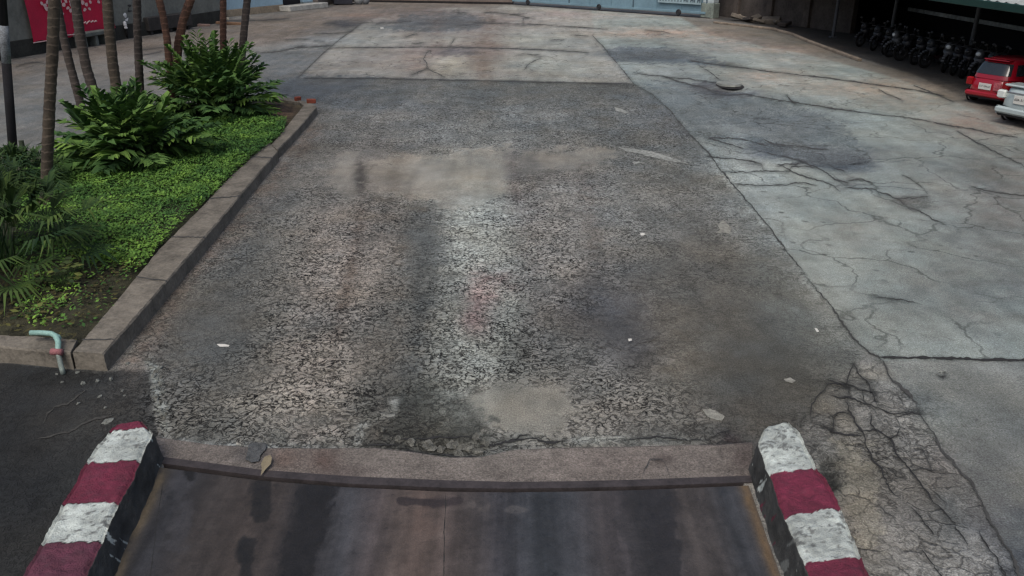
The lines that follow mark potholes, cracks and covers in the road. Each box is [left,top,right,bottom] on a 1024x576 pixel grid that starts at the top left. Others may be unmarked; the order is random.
crack [637,65,1024,167]
crack [368,434,564,458]
crack [706,137,942,223]
crack [810,363,1006,576]
manhole cover [716,81,744,89]
crack [628,430,732,445]
